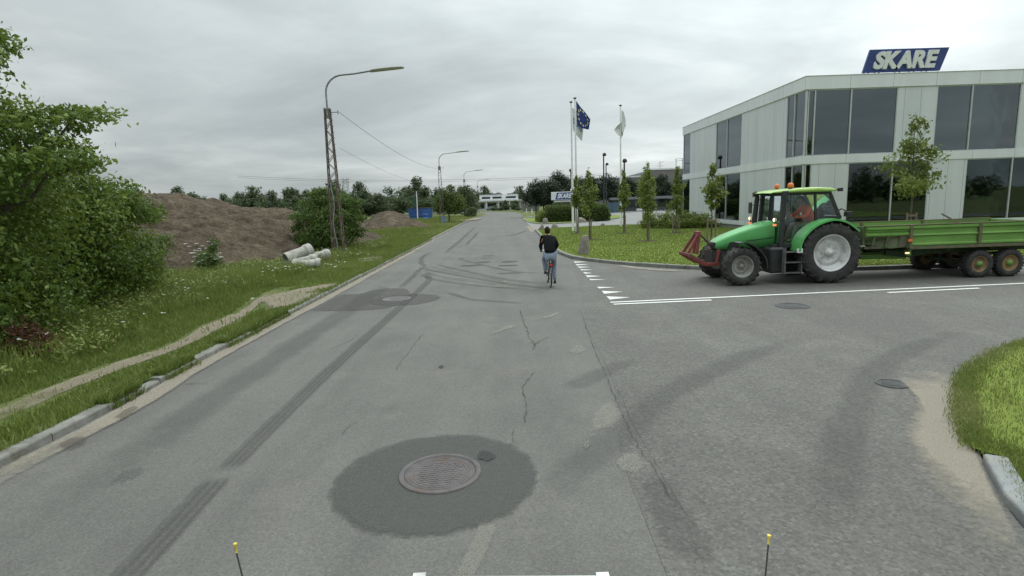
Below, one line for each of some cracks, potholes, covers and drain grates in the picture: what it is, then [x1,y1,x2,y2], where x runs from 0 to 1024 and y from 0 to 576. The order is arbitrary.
manhole cover [398,454,481,494]
manhole cover [875,378,909,389]
